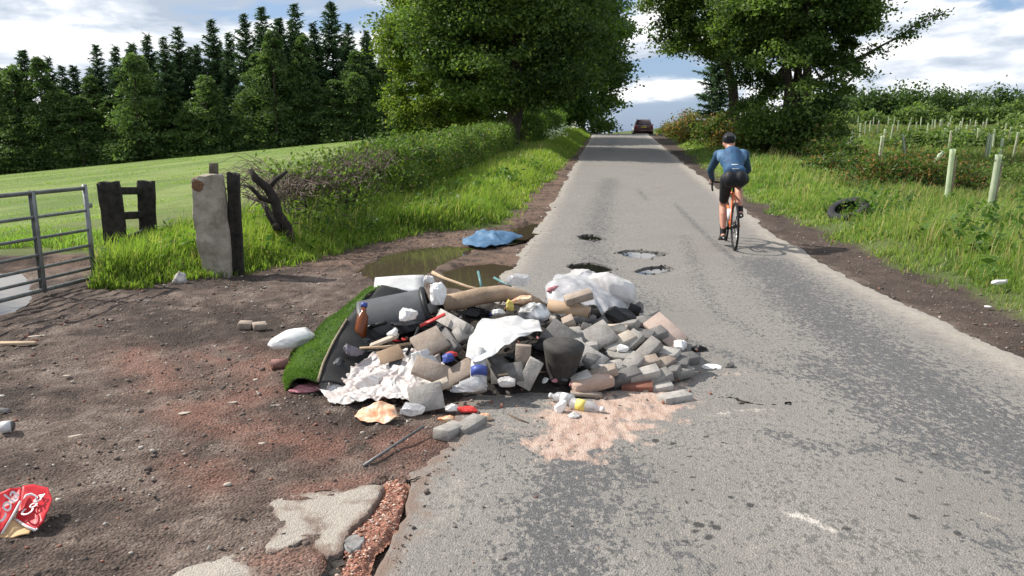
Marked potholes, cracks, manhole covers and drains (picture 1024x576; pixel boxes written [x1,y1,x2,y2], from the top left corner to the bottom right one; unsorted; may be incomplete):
pothole [567,263,618,273]
pothole [635,265,674,275]
pothole [613,249,668,260]
crack [727,397,792,405]
pothole [577,234,606,242]
